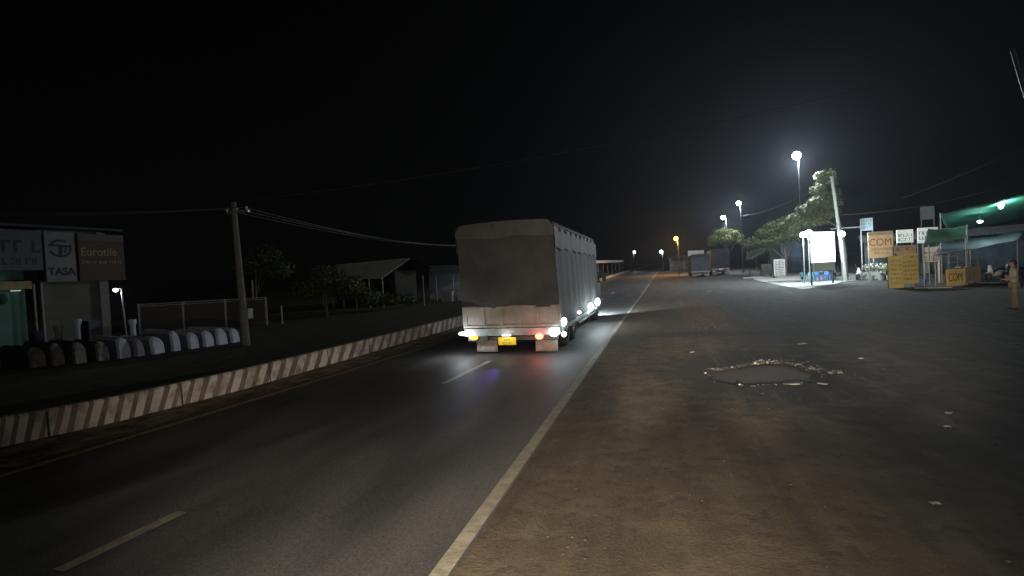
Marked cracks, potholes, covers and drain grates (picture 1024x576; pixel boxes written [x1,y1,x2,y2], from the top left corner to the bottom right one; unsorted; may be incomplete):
pothole [704,358,842,387]
